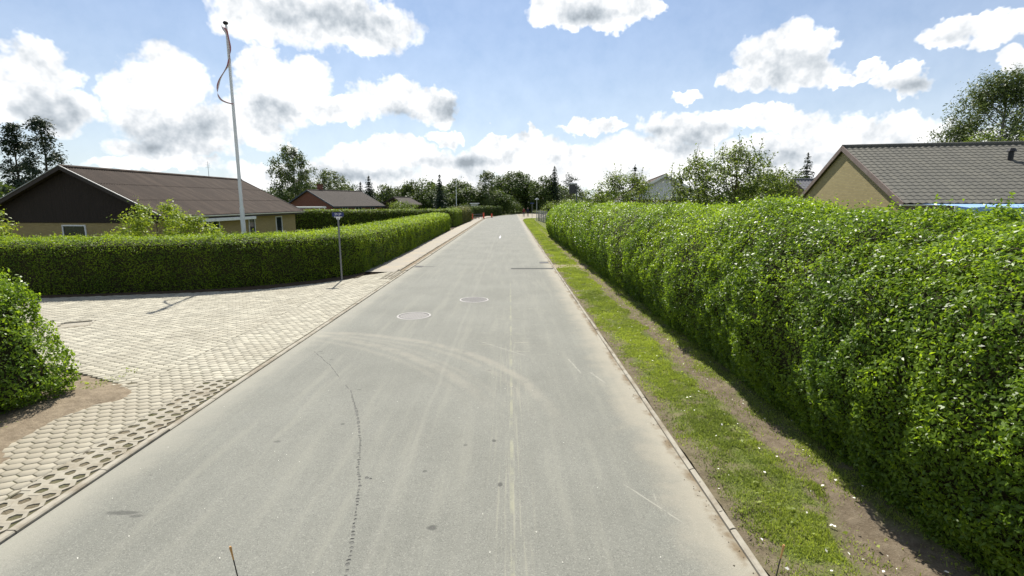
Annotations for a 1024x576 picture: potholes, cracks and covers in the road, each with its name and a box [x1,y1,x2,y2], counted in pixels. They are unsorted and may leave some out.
manhole cover [397,312,431,320]
crack [315,352,372,576]
